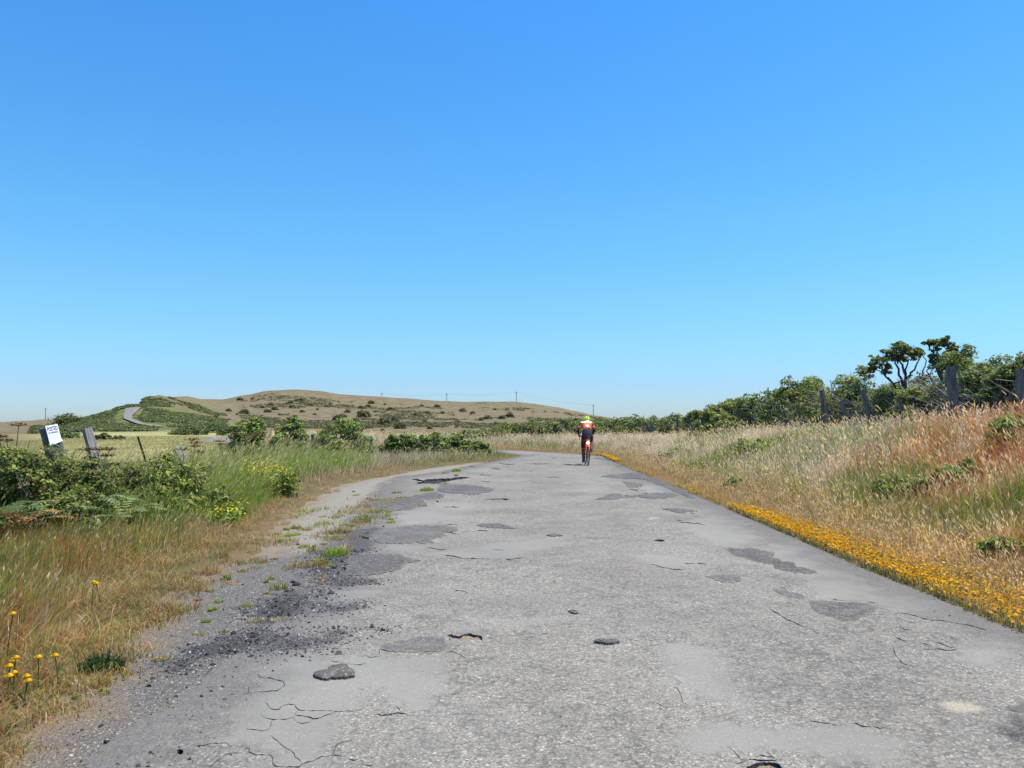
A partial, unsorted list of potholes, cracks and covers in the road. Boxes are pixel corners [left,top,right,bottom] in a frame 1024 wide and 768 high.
pothole [447,633,483,641]
crack [196,675,372,768]
crack [871,602,985,669]
